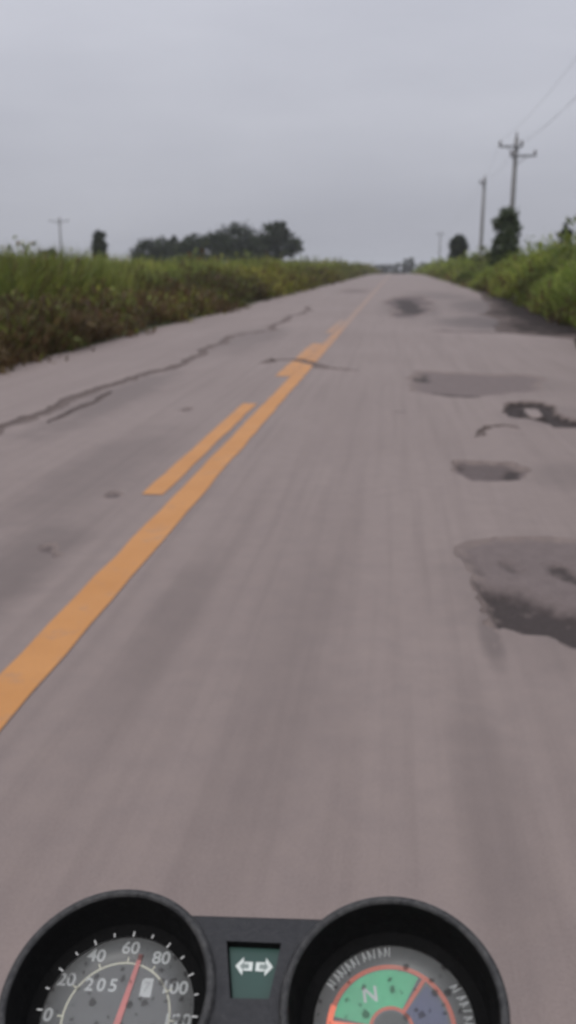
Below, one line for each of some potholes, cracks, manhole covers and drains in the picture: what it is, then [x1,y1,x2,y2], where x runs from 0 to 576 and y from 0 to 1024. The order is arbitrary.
pothole [450,460,532,481]
crack [474,425,519,437]
crack [0,306,359,435]
pothole [502,401,576,428]
